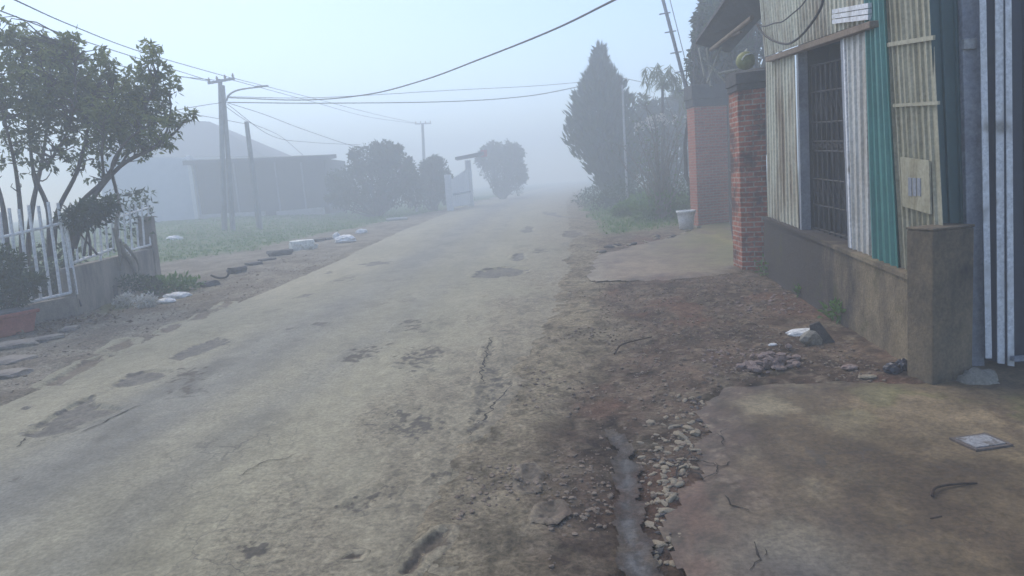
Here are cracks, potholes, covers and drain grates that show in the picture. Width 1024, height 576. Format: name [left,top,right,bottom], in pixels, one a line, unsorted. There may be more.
pothole [386,524,459,576]
pothole [4,391,141,444]
pothole [97,366,185,392]
pothole [505,252,531,262]
manhole cover [949,432,1013,452]
pothole [463,265,540,280]
pothole [160,336,239,364]
pothole [378,344,459,377]
crack [470,337,512,435]
